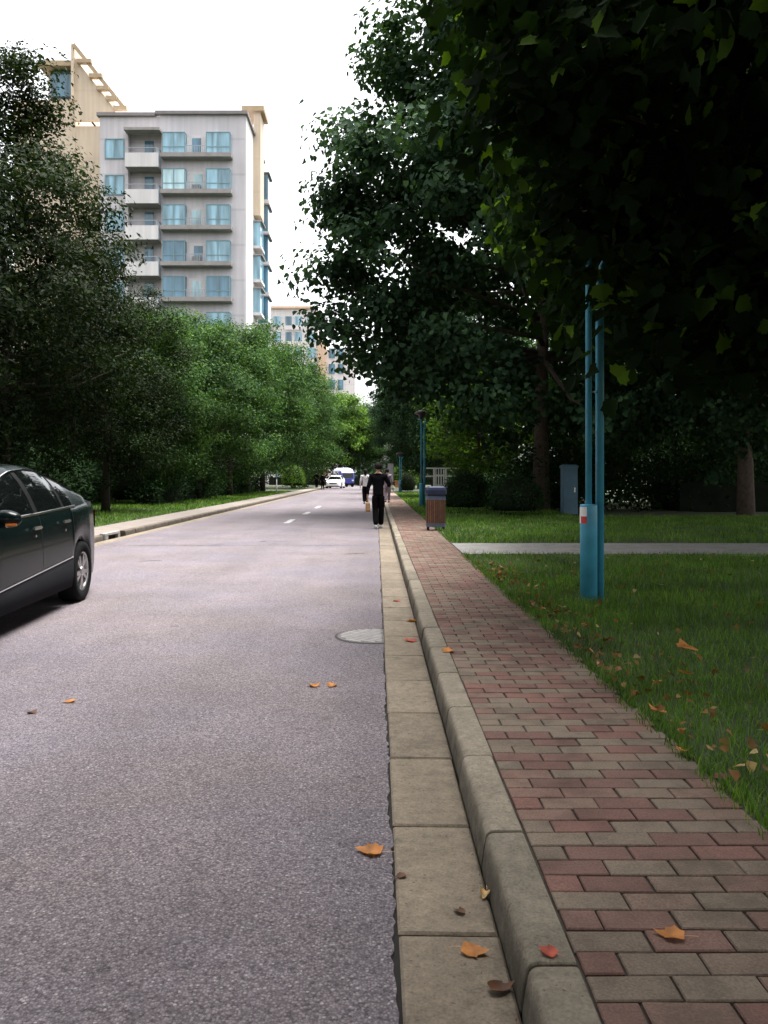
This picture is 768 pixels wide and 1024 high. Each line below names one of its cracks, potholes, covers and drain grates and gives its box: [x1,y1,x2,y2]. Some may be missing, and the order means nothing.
drain grate [100,531,120,541]
manhole cover [335,629,384,644]
